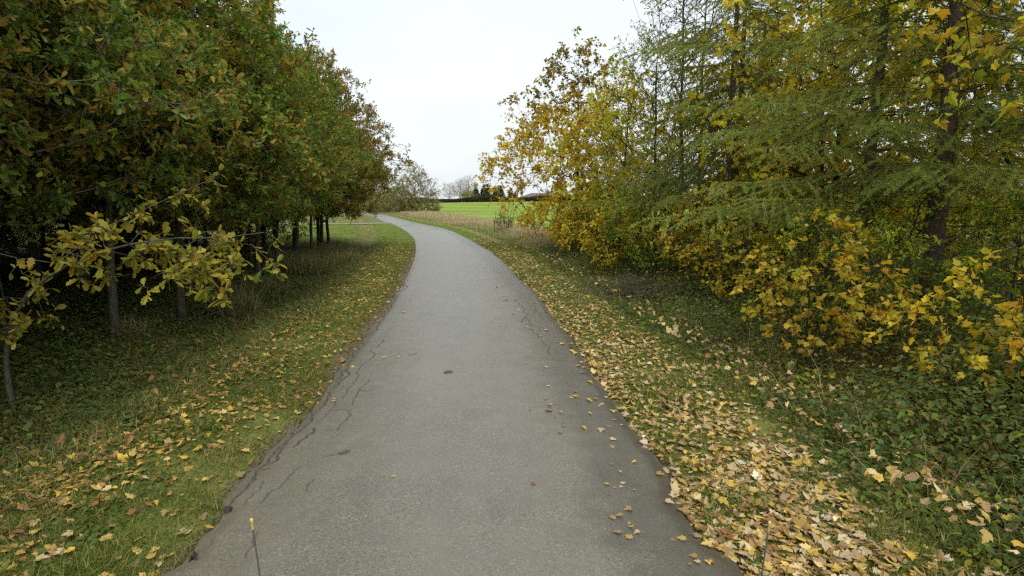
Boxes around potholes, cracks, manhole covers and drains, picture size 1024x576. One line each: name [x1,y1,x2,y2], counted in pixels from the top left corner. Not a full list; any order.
crack [514,294,553,358]
crack [228,283,408,507]
